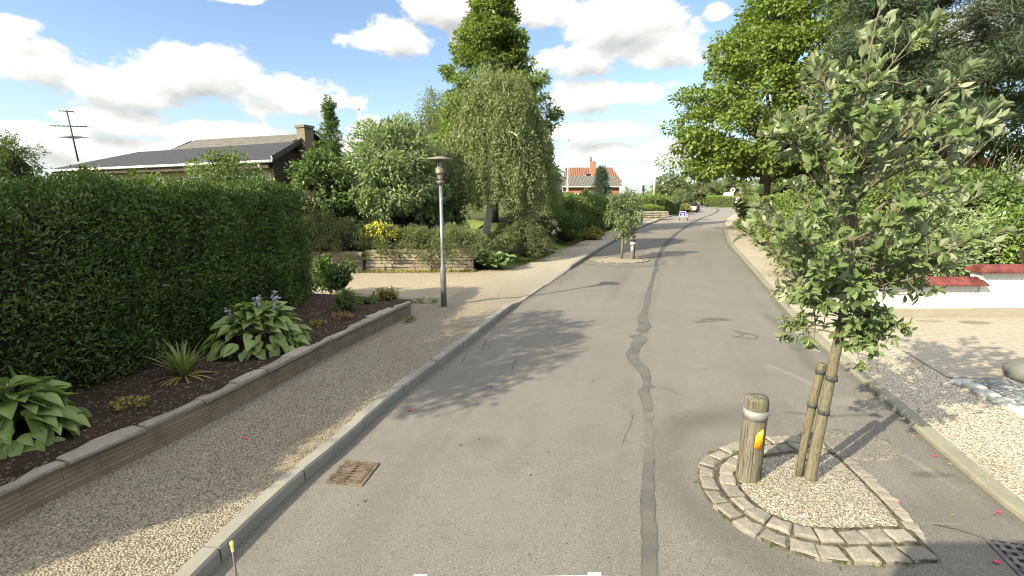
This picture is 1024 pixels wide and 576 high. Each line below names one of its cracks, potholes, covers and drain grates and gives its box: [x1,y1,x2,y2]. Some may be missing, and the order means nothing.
drain grate [980,535,1024,576]
drain grate [324,460,380,487]
